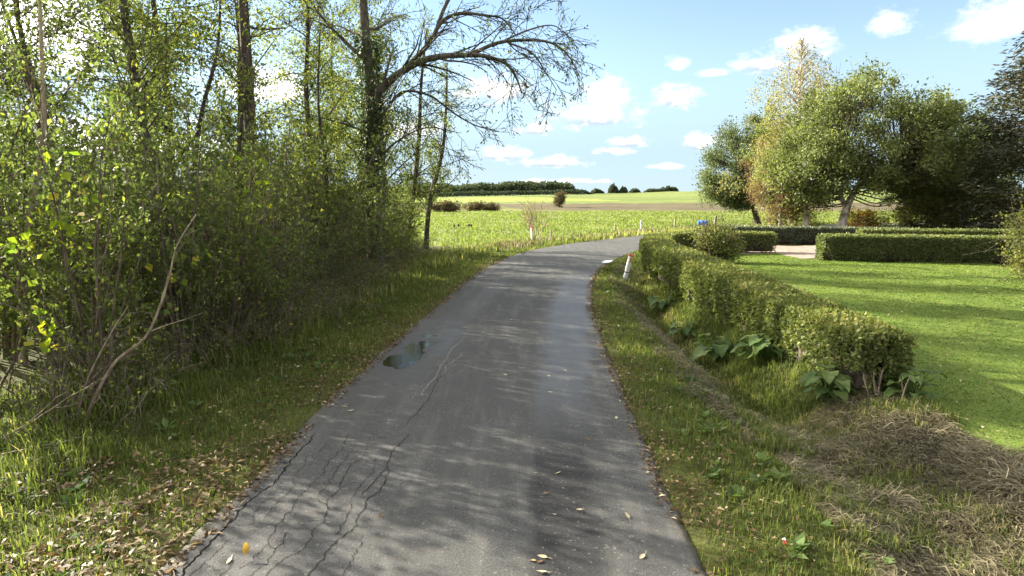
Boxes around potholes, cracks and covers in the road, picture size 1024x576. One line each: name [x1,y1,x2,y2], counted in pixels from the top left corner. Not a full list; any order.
crack [181,336,466,576]
